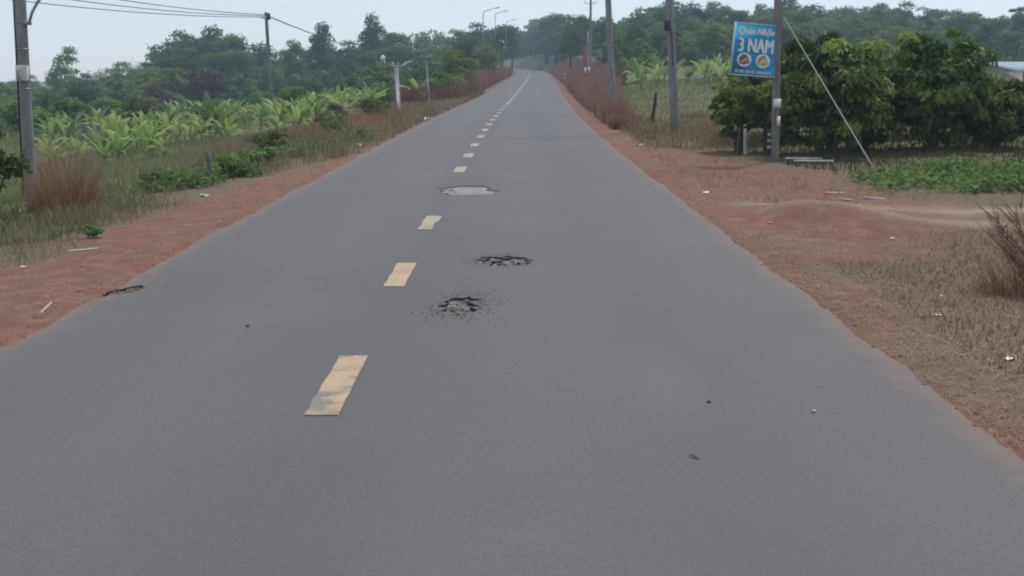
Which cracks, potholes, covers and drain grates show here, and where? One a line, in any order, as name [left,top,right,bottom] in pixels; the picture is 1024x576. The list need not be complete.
pothole [409,285,511,326]
pothole [454,246,534,271]
